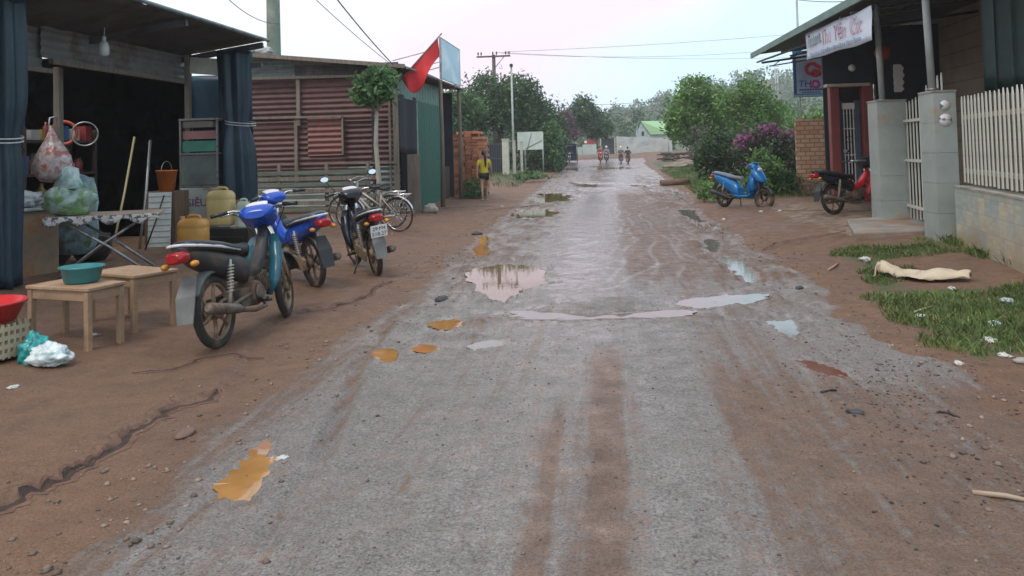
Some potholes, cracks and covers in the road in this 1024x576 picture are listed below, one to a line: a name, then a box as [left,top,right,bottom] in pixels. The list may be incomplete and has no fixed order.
pothole [461,262,562,304]
crack [0,352,264,515]
crack [296,281,392,314]
